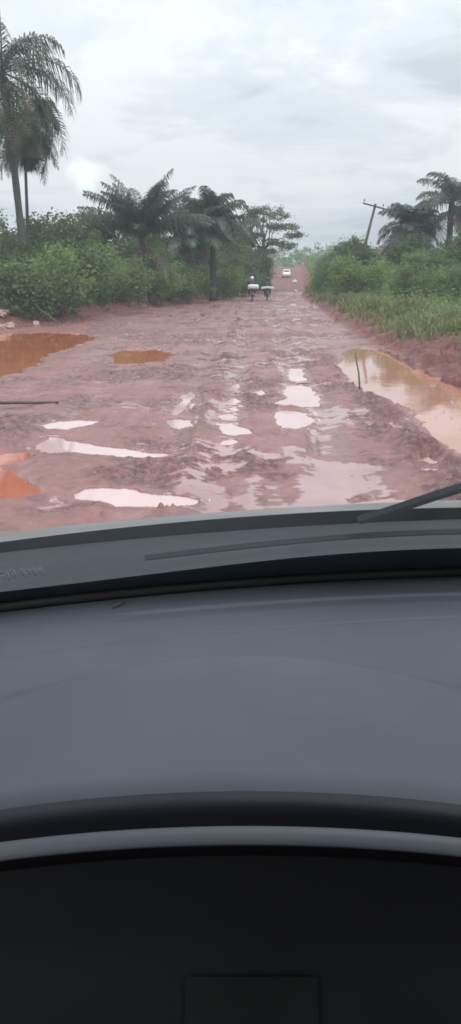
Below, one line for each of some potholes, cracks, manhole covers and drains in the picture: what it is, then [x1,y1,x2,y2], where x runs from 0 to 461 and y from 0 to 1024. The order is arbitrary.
pothole [26,436,184,459]
pothole [337,346,461,457]
pothole [0,449,42,466]
pothole [0,466,46,499]
pothole [270,384,325,408]
pothole [37,418,106,431]
pothole [0,332,98,378]
pothole [162,416,197,431]
pothole [268,409,321,430]
pothole [64,483,210,509]
pothole [210,421,260,437]
pothole [103,349,181,365]
